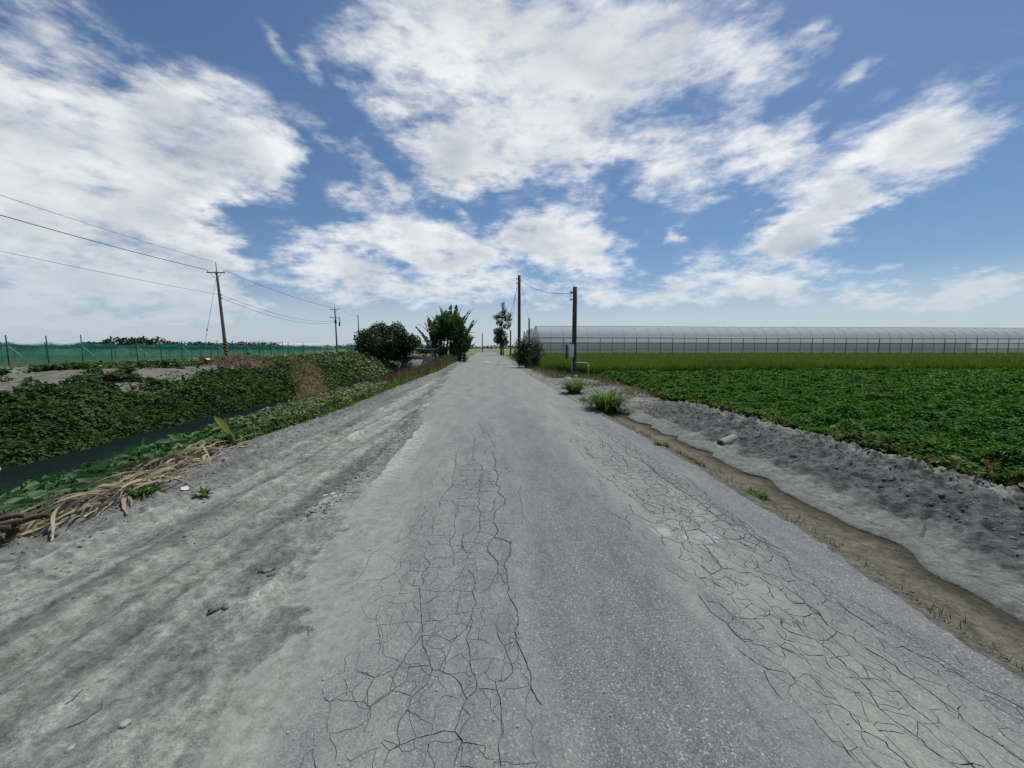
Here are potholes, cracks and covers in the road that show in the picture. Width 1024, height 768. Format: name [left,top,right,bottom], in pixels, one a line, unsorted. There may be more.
crack [300,413,542,768]
crack [567,408,1024,768]
